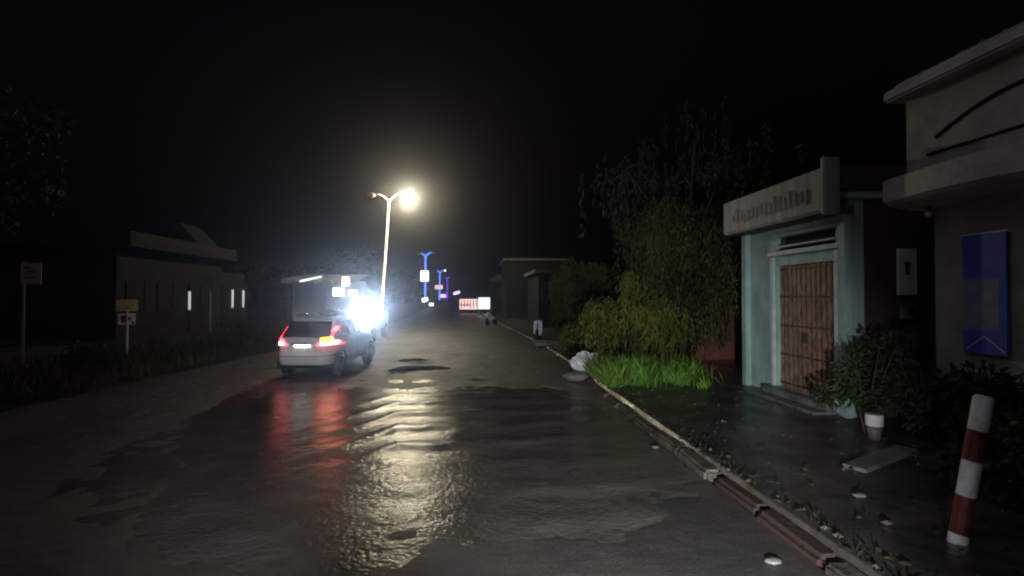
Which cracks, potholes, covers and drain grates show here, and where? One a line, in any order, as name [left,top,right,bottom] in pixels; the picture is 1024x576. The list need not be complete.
pothole [383,365,457,375]
